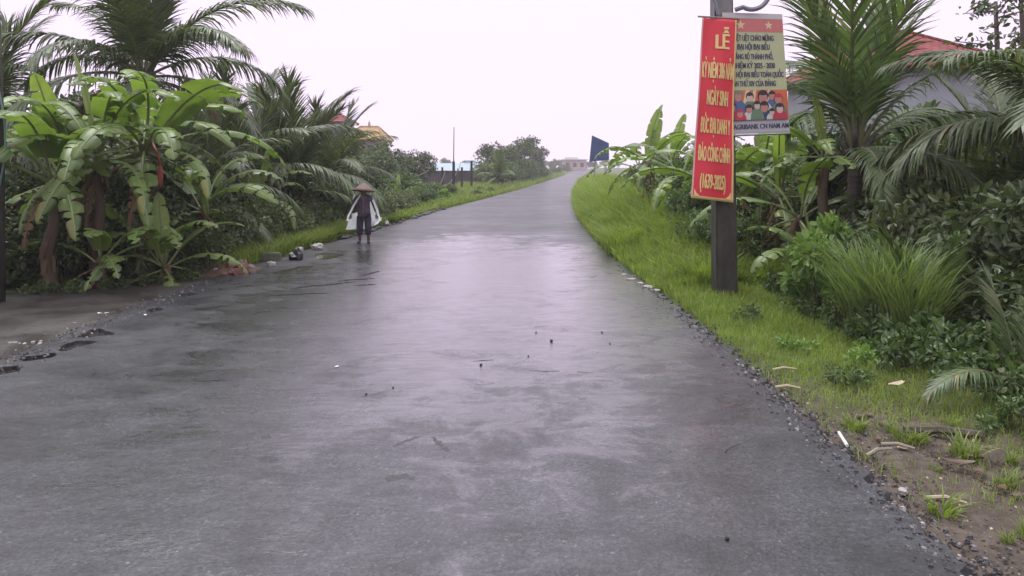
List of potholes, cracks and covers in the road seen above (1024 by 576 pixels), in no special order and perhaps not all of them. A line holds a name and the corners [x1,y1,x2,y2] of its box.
pothole [0,366,21,375]
pothole [78,328,114,338]
pothole [19,353,57,361]
crack [393,436,449,452]
pothole [58,340,97,352]
